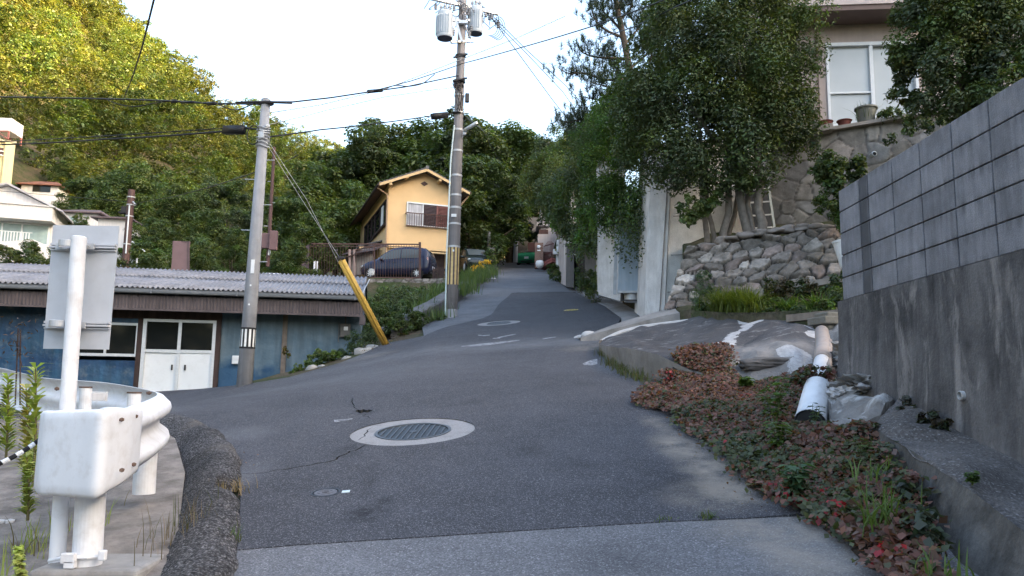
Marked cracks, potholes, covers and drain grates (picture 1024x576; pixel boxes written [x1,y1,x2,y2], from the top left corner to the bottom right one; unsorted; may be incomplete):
manhole cover [310,488,341,497]
manhole cover [350,419,475,446]
crack [243,399,372,474]
